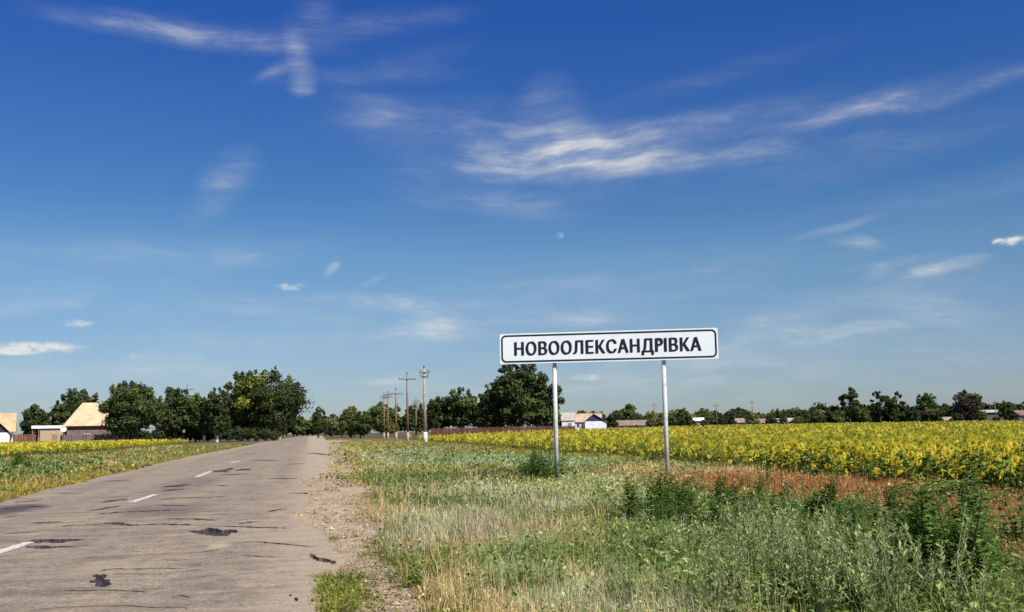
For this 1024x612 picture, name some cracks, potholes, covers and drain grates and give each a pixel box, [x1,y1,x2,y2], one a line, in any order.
pothole [309,553,336,565]
crack [3,453,311,610]
pothole [189,528,237,536]
pothole [89,574,112,587]
pothole [30,539,84,547]
